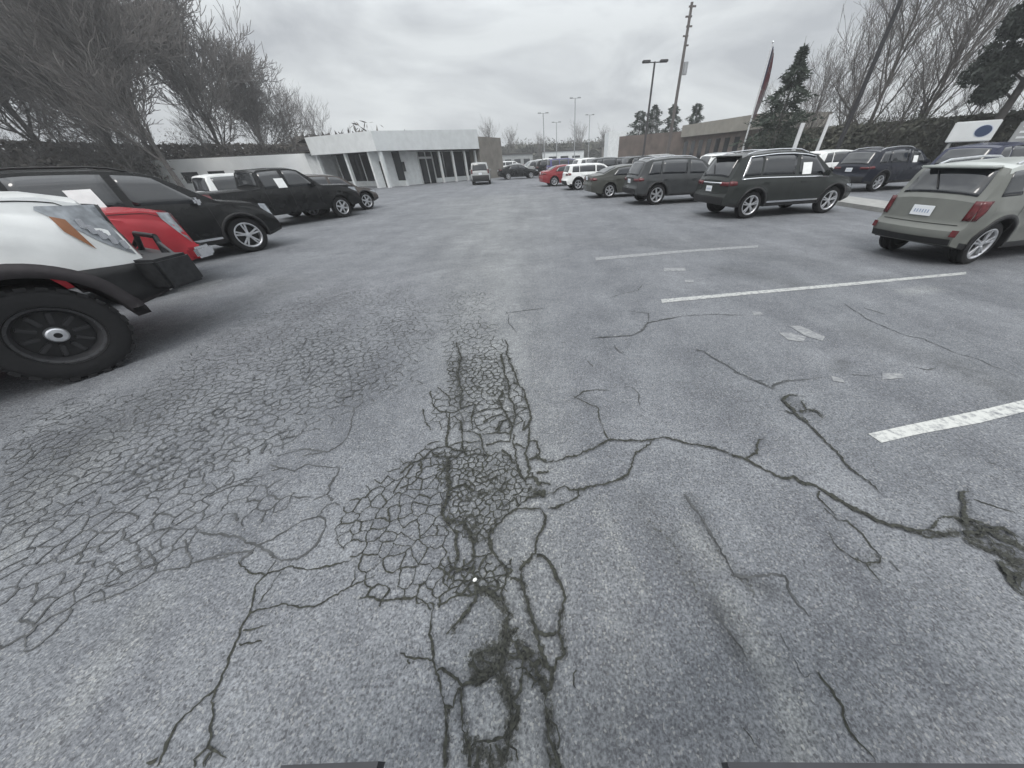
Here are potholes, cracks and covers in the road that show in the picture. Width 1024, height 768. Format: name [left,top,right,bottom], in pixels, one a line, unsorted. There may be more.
crack [0,285,1024,768]
